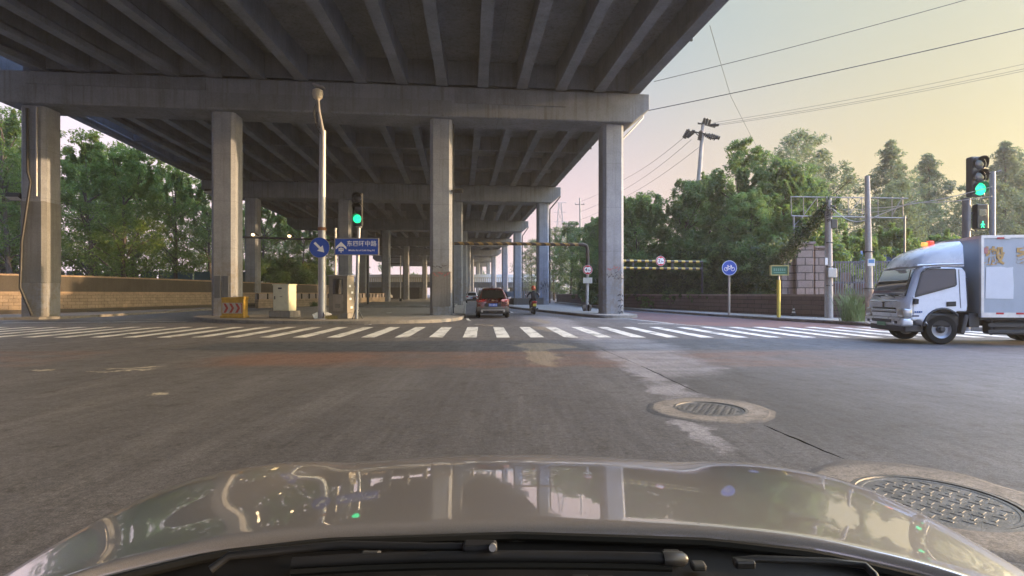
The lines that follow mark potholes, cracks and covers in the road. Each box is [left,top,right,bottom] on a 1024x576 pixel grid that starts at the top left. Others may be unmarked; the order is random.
manhole cover [646,397,776,424]
manhole cover [809,460,1024,563]
